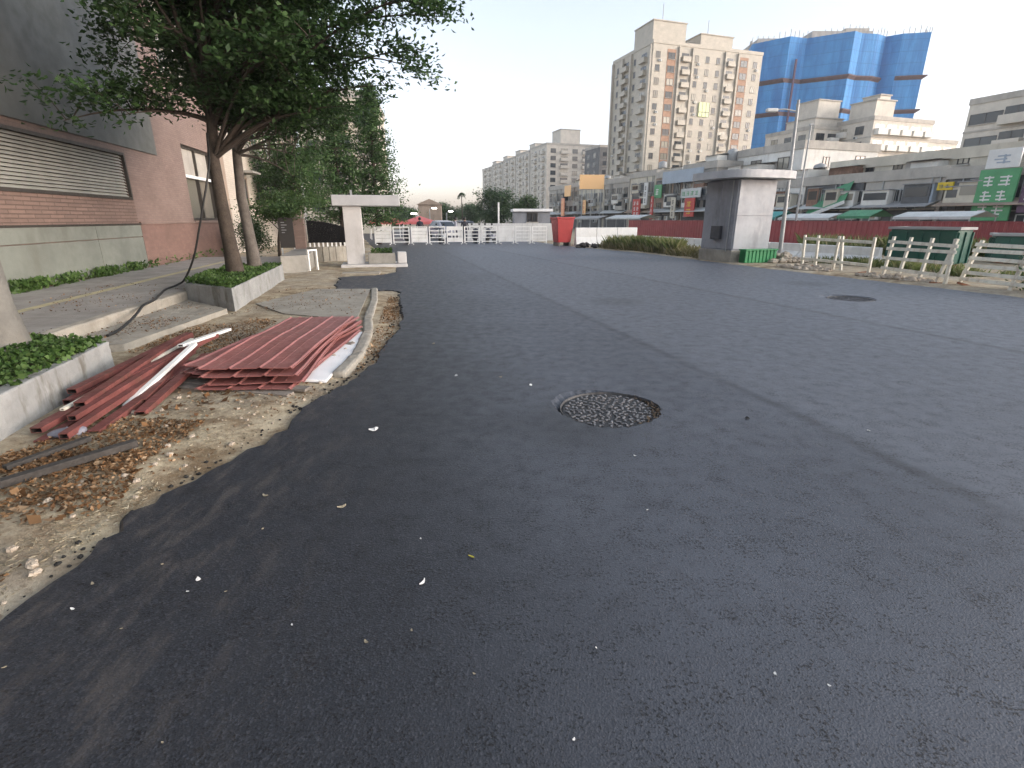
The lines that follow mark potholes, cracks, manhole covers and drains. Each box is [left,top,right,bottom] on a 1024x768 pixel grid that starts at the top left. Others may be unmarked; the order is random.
manhole cover [559,392,659,428]
